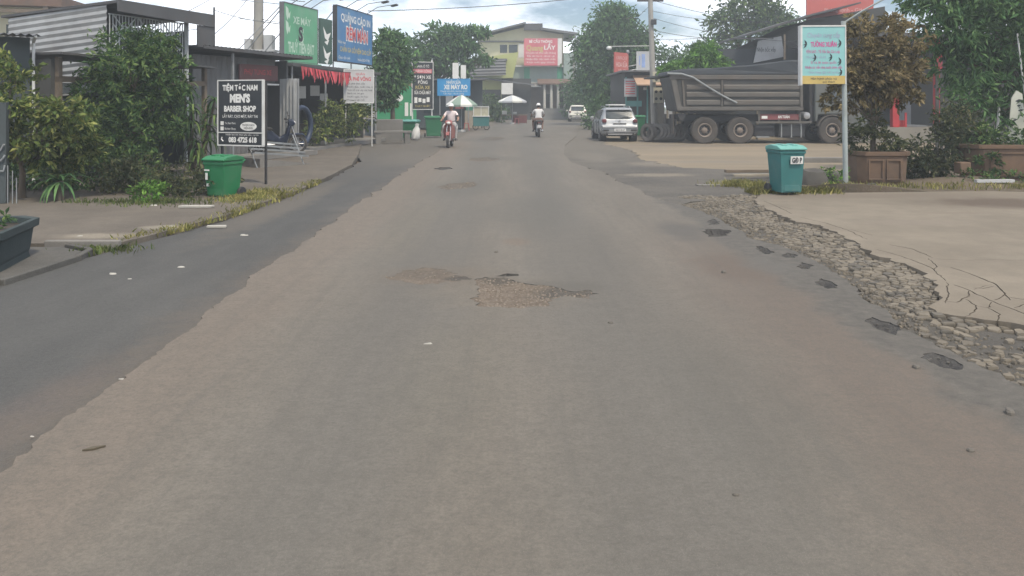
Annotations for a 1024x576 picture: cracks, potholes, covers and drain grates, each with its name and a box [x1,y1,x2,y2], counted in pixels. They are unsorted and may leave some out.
pothole [701,229,732,237]
pothole [815,278,837,289]
crack [767,202,1024,324]
pothole [865,317,901,335]
pothole [920,352,963,370]
pothole [470,277,598,308]
pothole [386,268,472,285]
